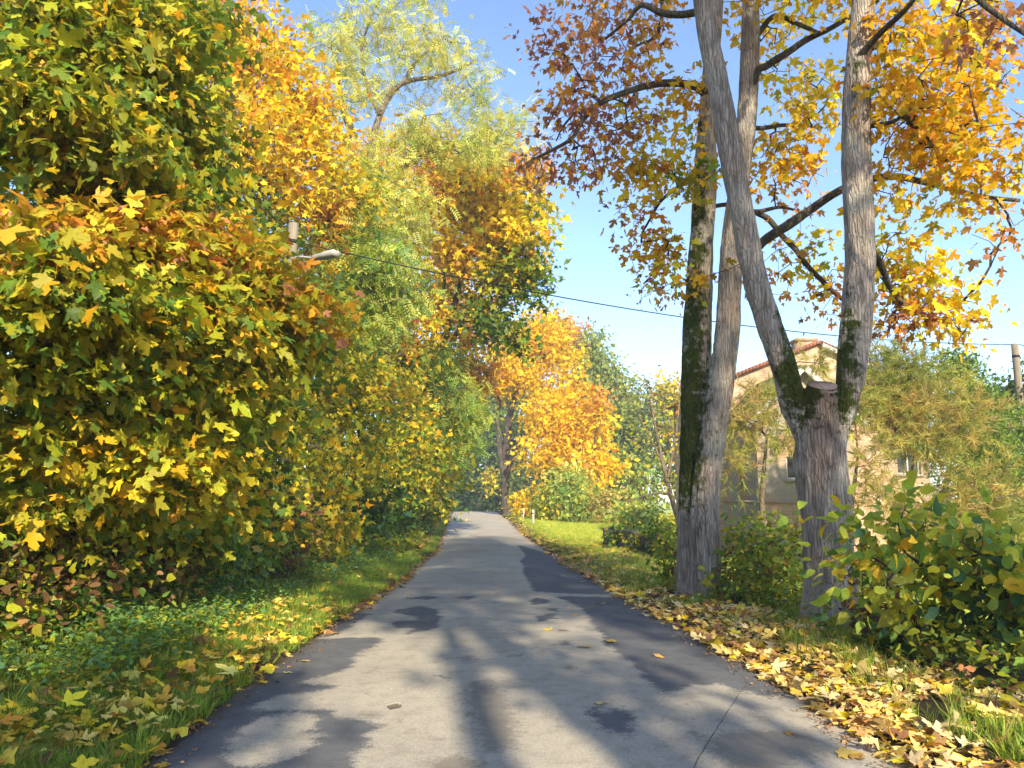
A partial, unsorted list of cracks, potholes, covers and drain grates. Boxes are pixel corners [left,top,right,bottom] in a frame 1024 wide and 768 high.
crack [694,678,751,768]
